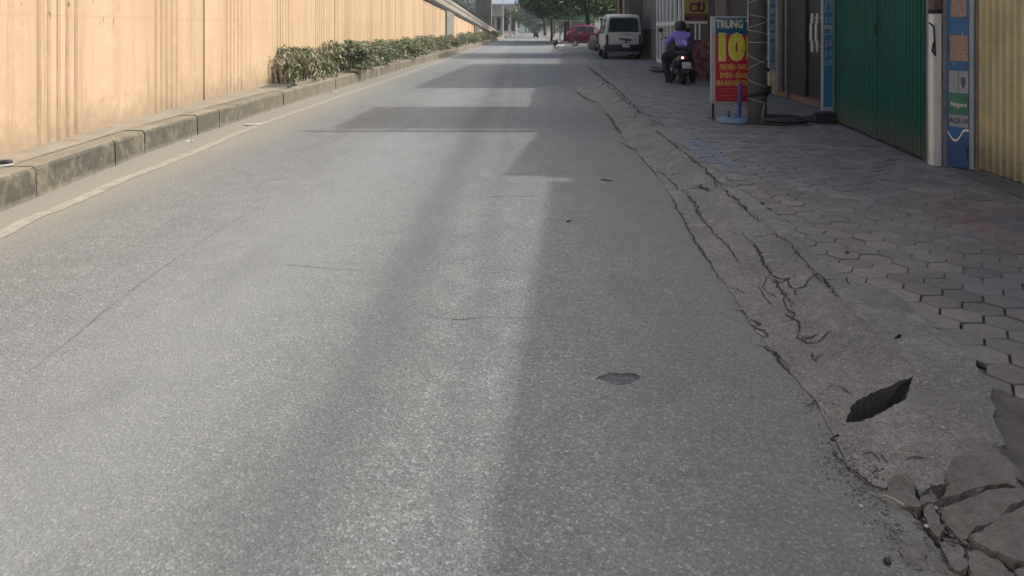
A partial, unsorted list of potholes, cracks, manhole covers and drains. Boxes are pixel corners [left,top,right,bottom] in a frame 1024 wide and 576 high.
crack [832,448,928,490]
pothole [595,372,640,385]
crack [20,208,256,377]
crack [658,162,830,361]
crack [578,81,654,132]
